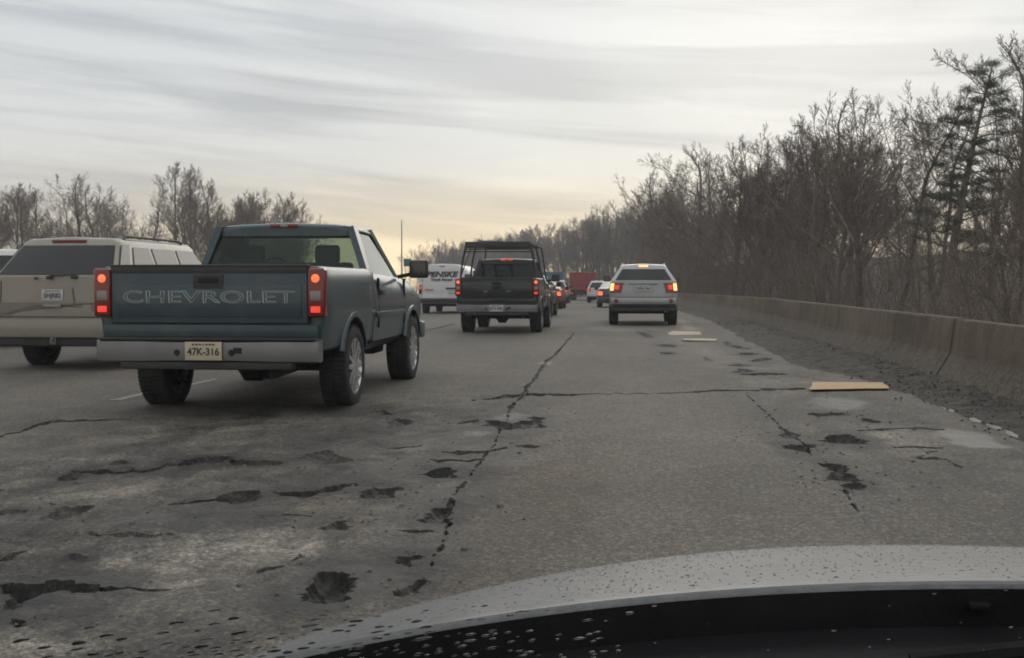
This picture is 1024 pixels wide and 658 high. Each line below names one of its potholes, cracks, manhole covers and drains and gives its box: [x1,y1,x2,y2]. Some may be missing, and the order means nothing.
pothole [819,463,860,482]
crack [858,427,963,469]
pothole [298,571,359,604]
crack [842,489,860,512]
pothole [272,483,359,498]
pothole [838,482,867,490]
pothole [416,508,454,527]
pothole [297,450,354,464]
pothole [819,434,871,444]
crack [0,419,132,438]
pothole [422,467,459,478]
